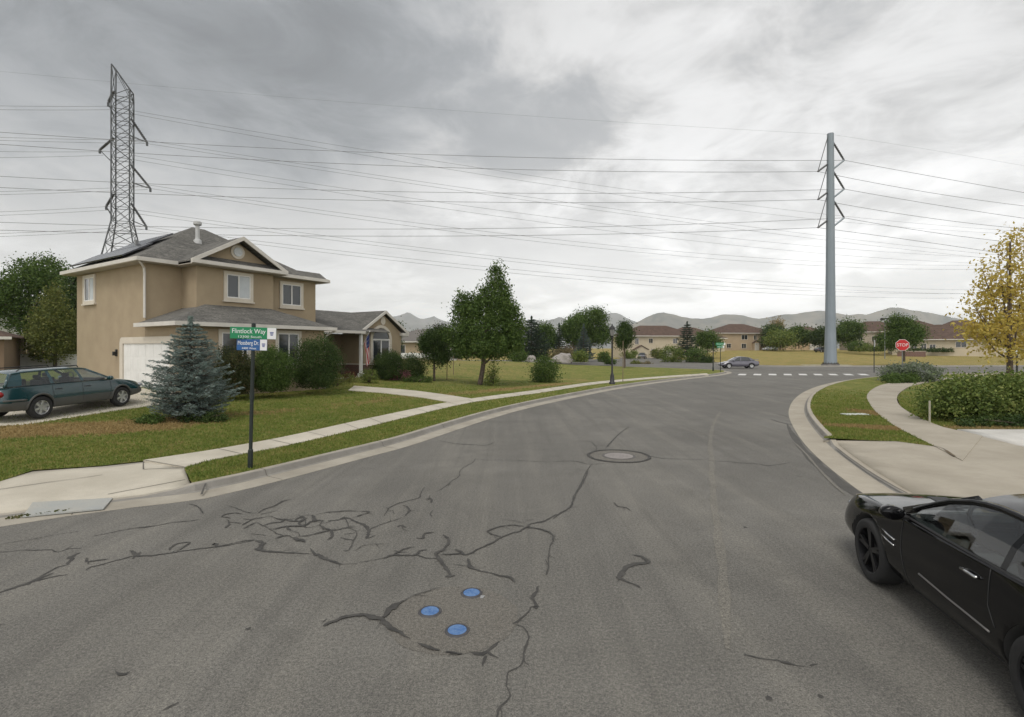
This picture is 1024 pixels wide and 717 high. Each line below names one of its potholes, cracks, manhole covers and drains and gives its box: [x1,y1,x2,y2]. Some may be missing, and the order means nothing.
crack [3,427,628,717]
crack [616,554,651,588]
manhole cover [587,449,651,463]
crack [744,654,814,666]
